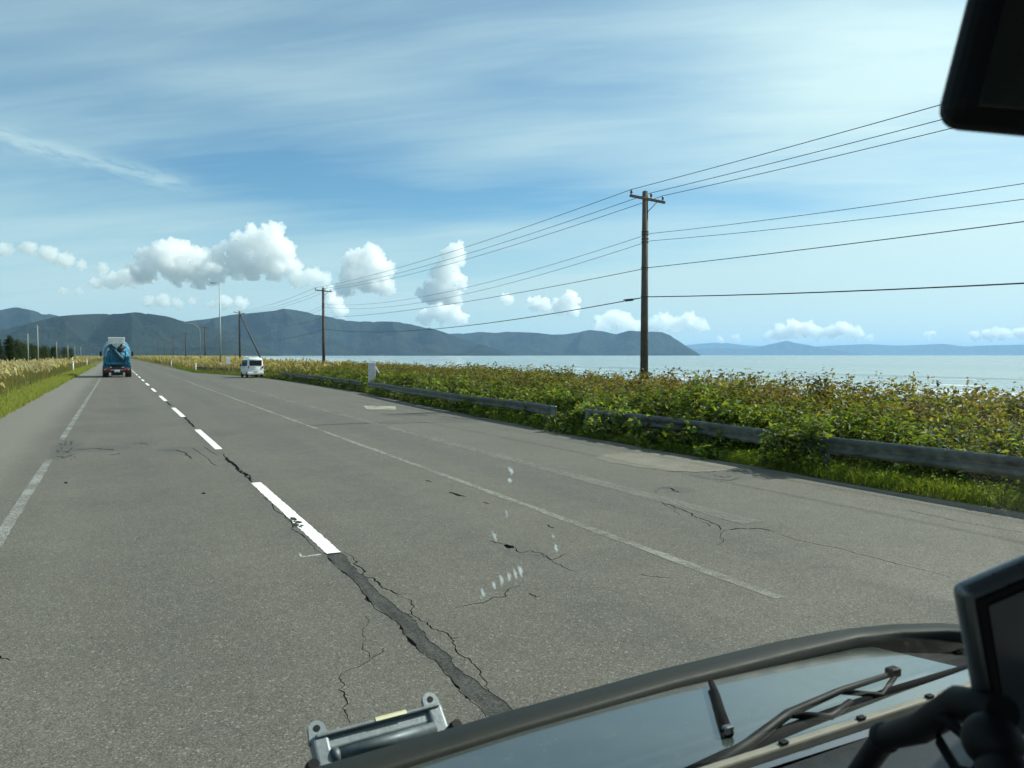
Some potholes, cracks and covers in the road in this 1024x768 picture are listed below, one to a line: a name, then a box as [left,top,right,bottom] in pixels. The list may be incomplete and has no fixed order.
crack [655,471,771,545]
crack [338,617,386,723]
crack [491,541,576,572]
crack [344,552,489,690]
crack [56,440,150,458]
